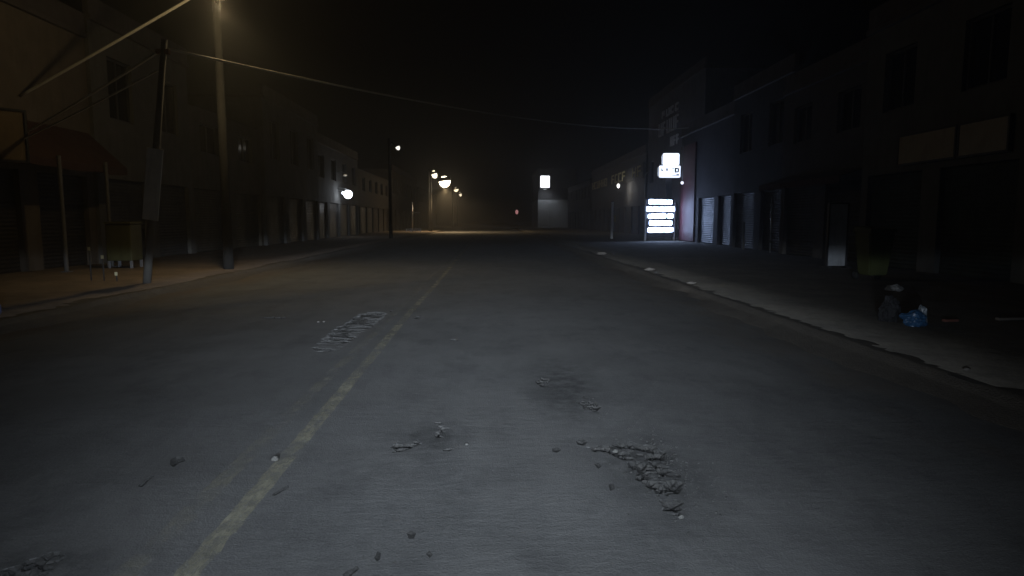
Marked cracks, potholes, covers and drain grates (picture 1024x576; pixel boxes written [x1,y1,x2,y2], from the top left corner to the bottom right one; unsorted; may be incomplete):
pothole [0,551,66,576]
pothole [576,396,601,413]
pothole [587,441,686,521]
pothole [389,439,422,453]
